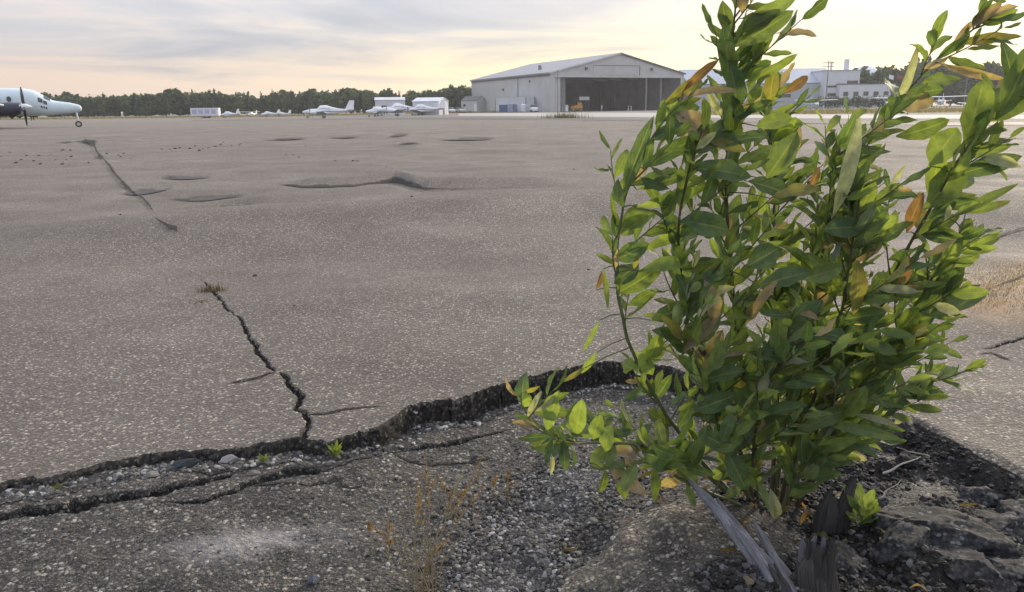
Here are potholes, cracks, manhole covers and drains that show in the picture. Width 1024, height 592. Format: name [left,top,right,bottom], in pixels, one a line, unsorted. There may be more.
crack [82,139,179,232]
crack [981,337,1024,360]
crack [0,282,746,520]
